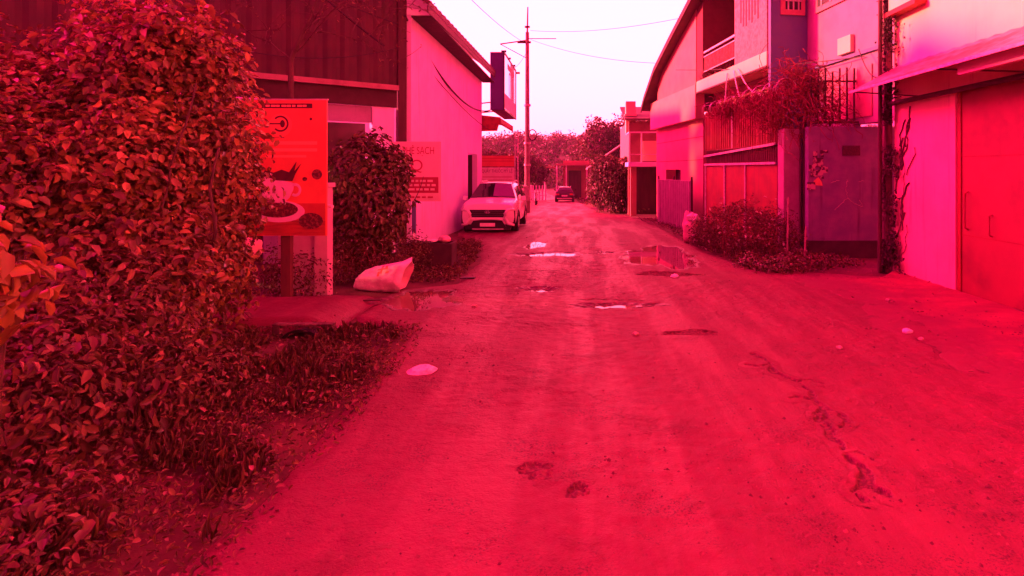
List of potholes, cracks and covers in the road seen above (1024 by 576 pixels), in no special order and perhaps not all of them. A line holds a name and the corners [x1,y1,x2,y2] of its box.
pothole [569,302,670,310]
pothole [660,328,722,336]
crack [738,334,990,509]
pothole [368,289,462,312]
pothole [618,244,703,270]
pothole [522,242,550,250]
pothole [514,461,553,481]
pothole [564,481,590,498]
